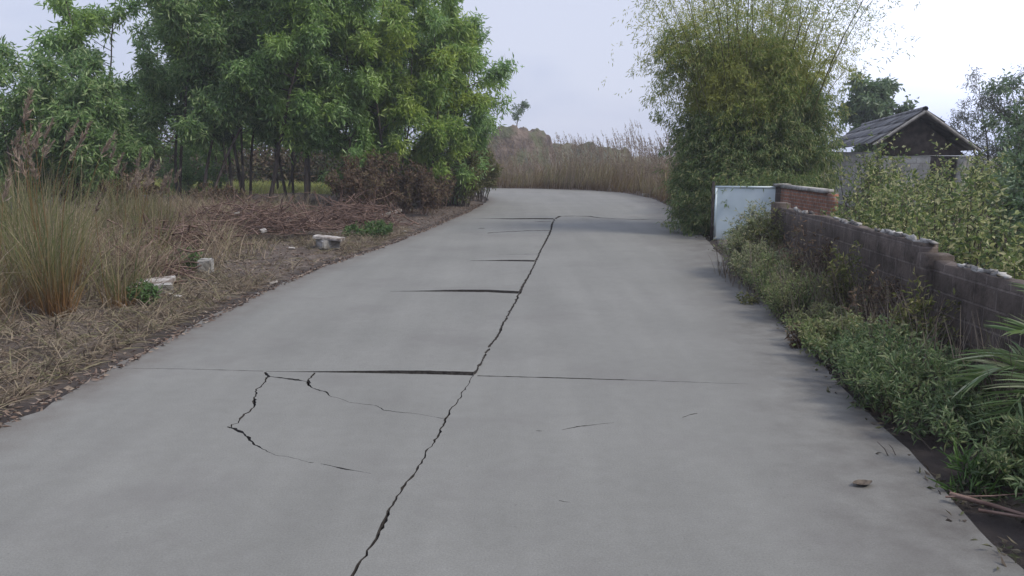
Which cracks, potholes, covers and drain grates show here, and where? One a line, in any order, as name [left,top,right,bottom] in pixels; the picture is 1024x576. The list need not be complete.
crack [228,372,447,473]
crack [492,216,612,233]
